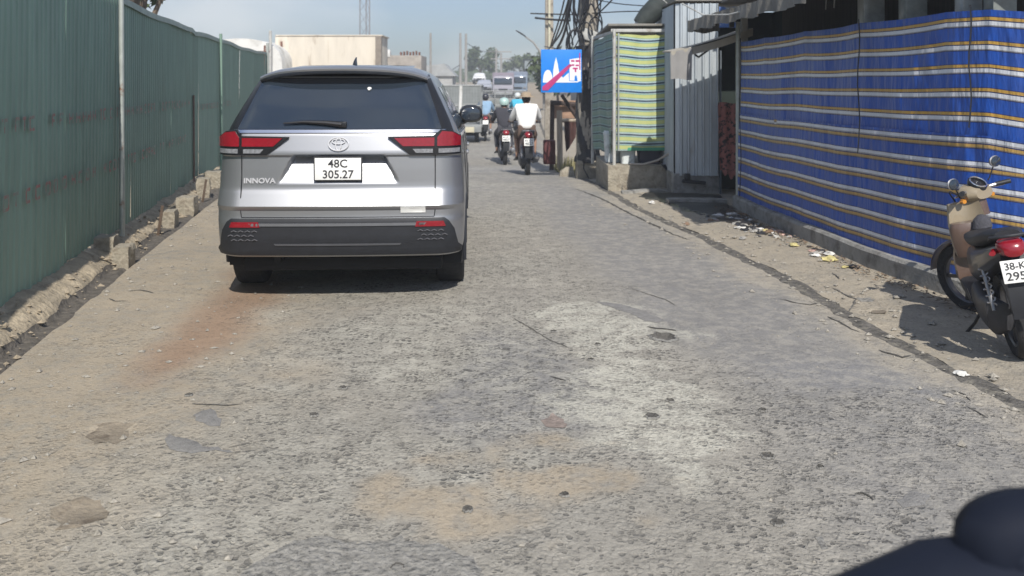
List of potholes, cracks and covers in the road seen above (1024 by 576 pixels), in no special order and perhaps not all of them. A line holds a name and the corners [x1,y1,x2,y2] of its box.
pothole [647,332,679,342]
